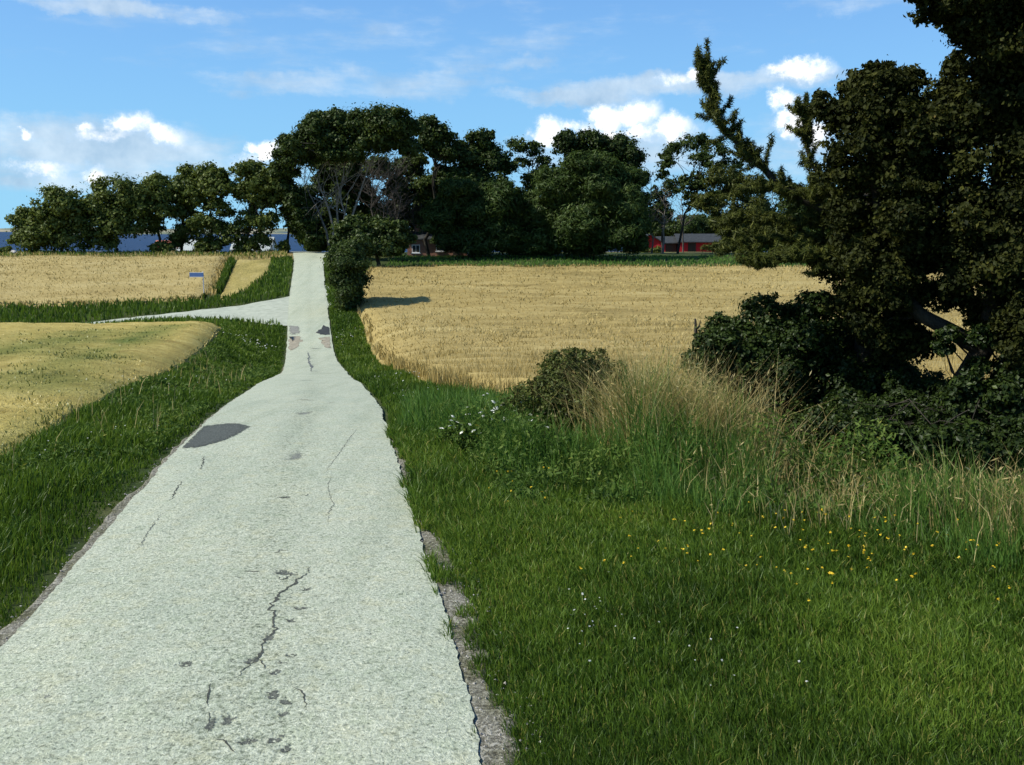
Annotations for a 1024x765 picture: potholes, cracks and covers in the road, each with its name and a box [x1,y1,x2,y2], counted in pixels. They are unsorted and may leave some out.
crack [233,566,309,678]
